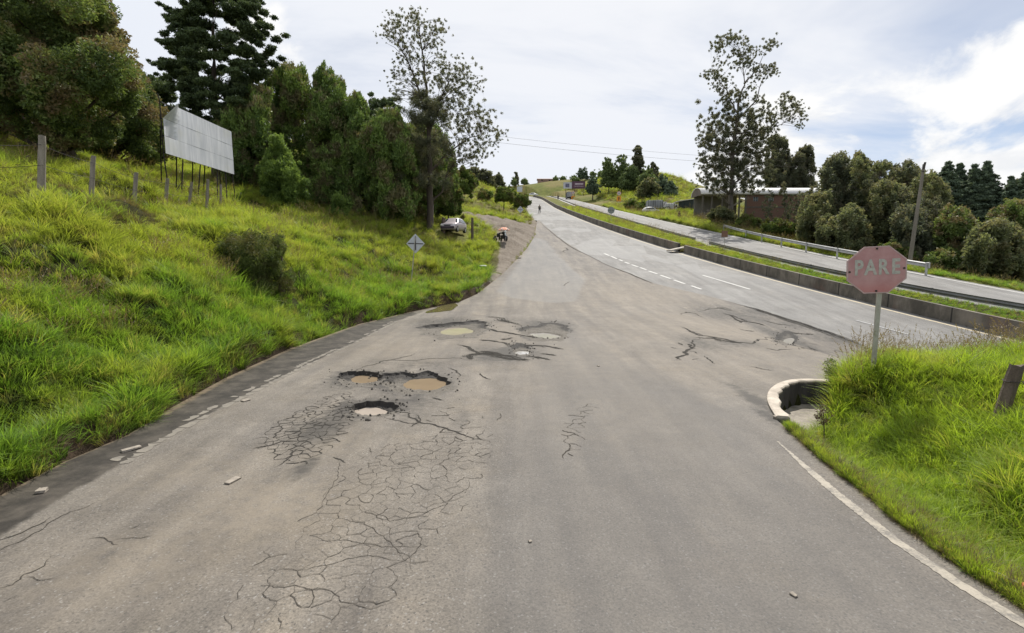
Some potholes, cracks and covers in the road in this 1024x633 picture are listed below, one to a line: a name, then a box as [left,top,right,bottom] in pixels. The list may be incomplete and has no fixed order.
crack [0,500,100,549]
pothole [337,395,410,421]
crack [562,404,592,457]
pothole [416,319,497,347]
drain grate [767,379,830,430]
pothole [323,367,393,391]
pothole [509,341,536,359]
crack [224,397,502,632]
pothole [511,320,574,345]
pothole [368,366,472,403]
pothole [769,327,802,346]
crack [672,307,841,371]
